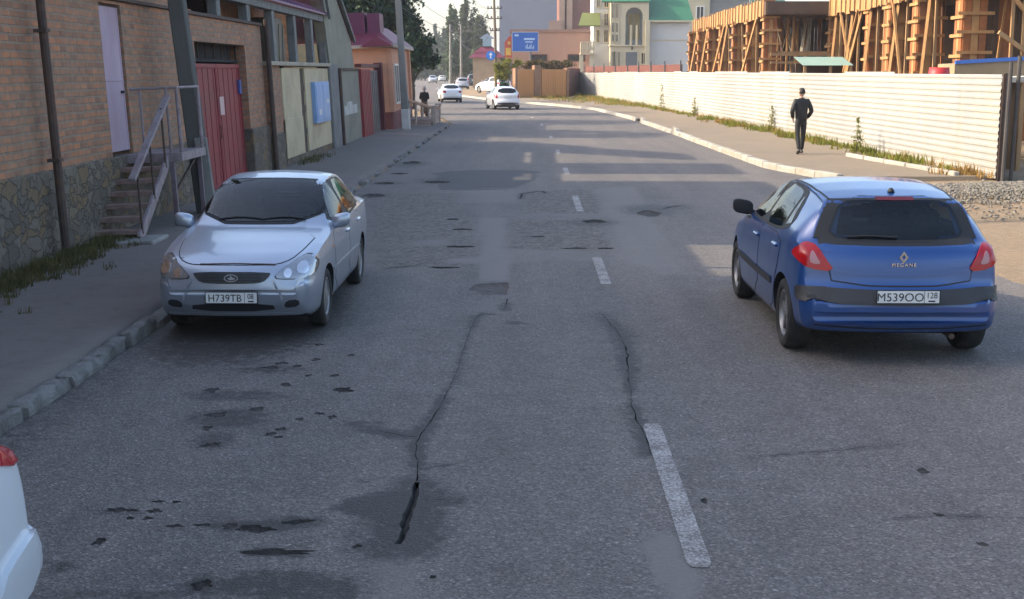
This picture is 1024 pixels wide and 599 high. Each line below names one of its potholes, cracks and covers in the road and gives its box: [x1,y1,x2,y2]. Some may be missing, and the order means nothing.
pothole [190,579,213,591]
pothole [234,524,277,534]
crack [602,314,652,454]
crack [366,314,493,544]
